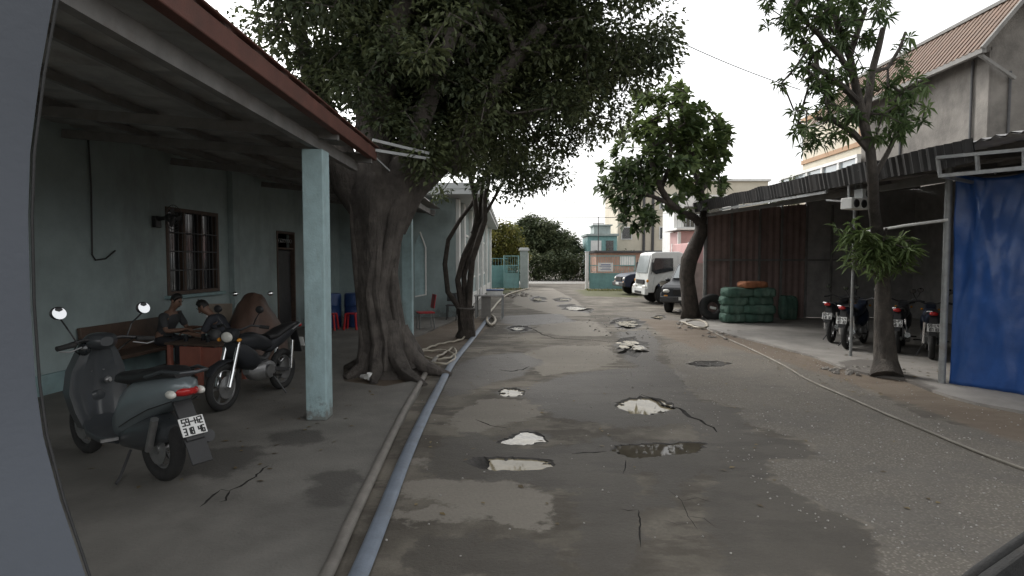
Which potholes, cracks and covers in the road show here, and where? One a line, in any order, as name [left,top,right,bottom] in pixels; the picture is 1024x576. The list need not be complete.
pothole [615,336,650,358]
pothole [498,388,525,397]
pothole [559,304,594,312]
pothole [464,456,555,471]
pothole [610,442,707,459]
pothole [496,431,549,446]
crack [641,394,717,432]
crack [200,466,267,507]
pothole [614,396,676,415]
crack [623,509,641,546]
pothole [610,318,647,329]
